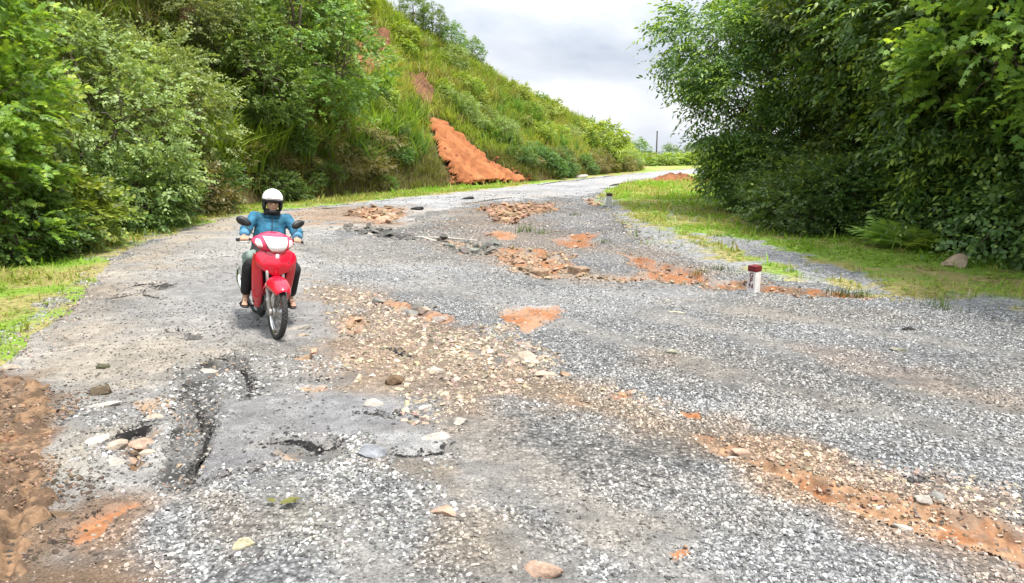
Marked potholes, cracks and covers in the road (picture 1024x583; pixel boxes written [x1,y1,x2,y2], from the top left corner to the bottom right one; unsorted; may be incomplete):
pothole [156,357,250,495]
pothole [344,207,406,224]
pothole [617,253,717,287]
pothole [550,233,602,248]
crack [108,283,160,299]
pothole [688,433,1024,575]
pothole [475,203,557,225]
pothole [497,305,565,334]
pothole [490,247,696,285]
pothole [271,444,345,463]
pothole [483,230,517,241]
